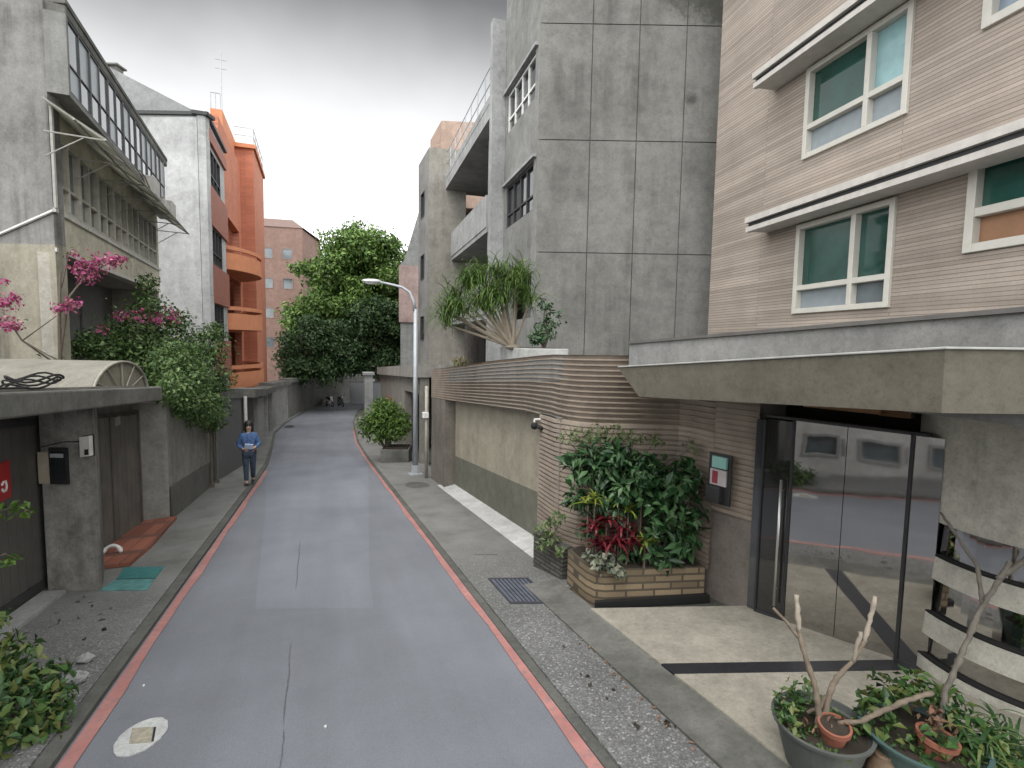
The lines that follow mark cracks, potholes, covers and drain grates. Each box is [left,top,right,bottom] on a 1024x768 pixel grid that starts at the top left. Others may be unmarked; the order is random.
drain grate [488,577,543,604]
manhole cover [113,717,168,757]
crack [279,545,300,768]
